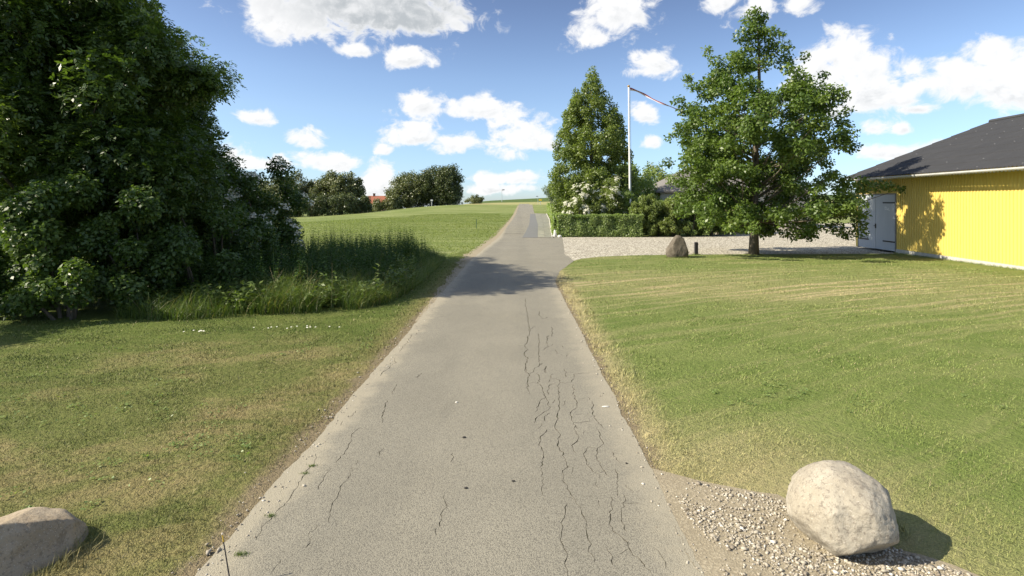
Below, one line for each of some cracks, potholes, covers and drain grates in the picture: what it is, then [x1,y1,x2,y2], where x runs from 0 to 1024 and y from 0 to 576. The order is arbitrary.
crack [520,300,666,576]
